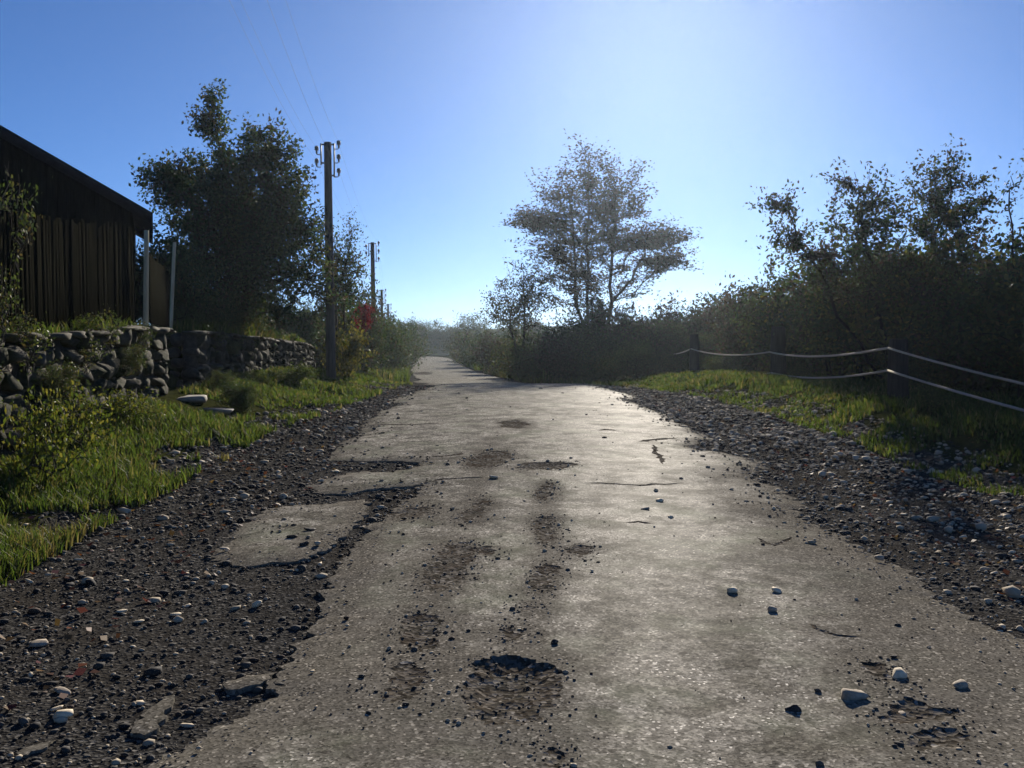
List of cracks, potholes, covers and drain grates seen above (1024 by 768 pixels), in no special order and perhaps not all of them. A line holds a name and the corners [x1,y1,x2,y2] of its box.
pothole [465,451,514,469]
pothole [524,563,563,594]
pothole [381,661,432,704]
crack [808,624,858,637]
crack [757,537,792,546]
pothole [531,516,557,544]
pothole [459,655,564,726]
pothole [516,461,578,470]
crack [640,438,680,464]
pothole [497,420,531,429]
pothole [420,542,482,592]
pothole [535,481,556,501]
